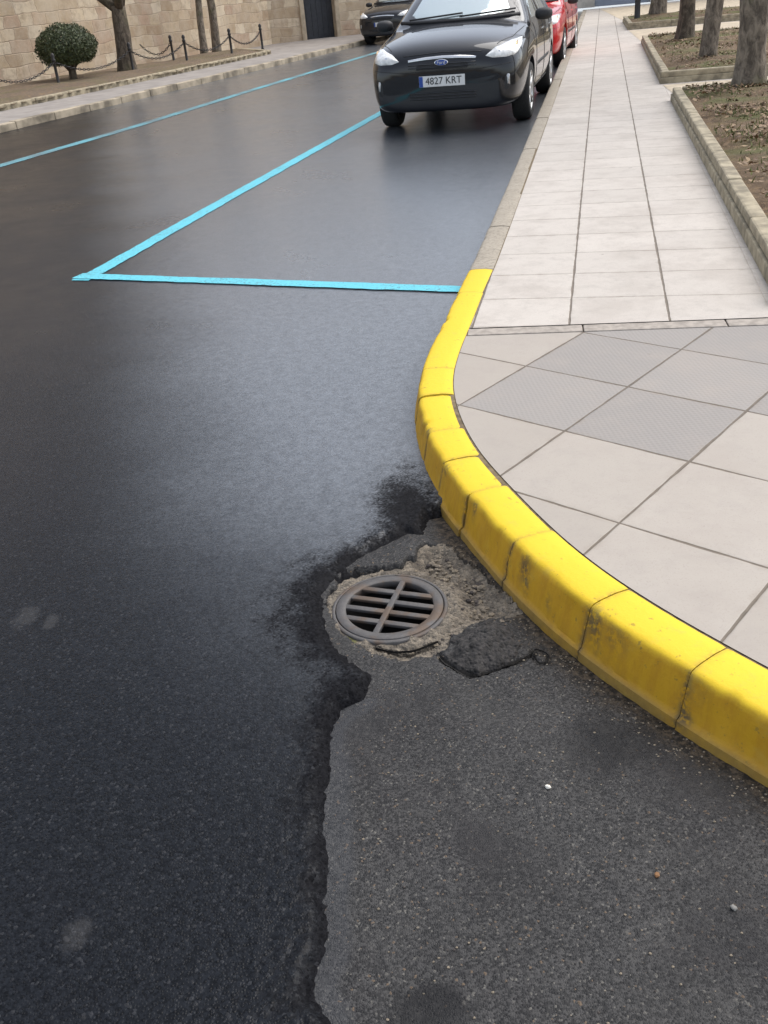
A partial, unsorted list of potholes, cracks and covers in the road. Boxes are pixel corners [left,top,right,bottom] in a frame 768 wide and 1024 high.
pothole [327,544,523,661]
